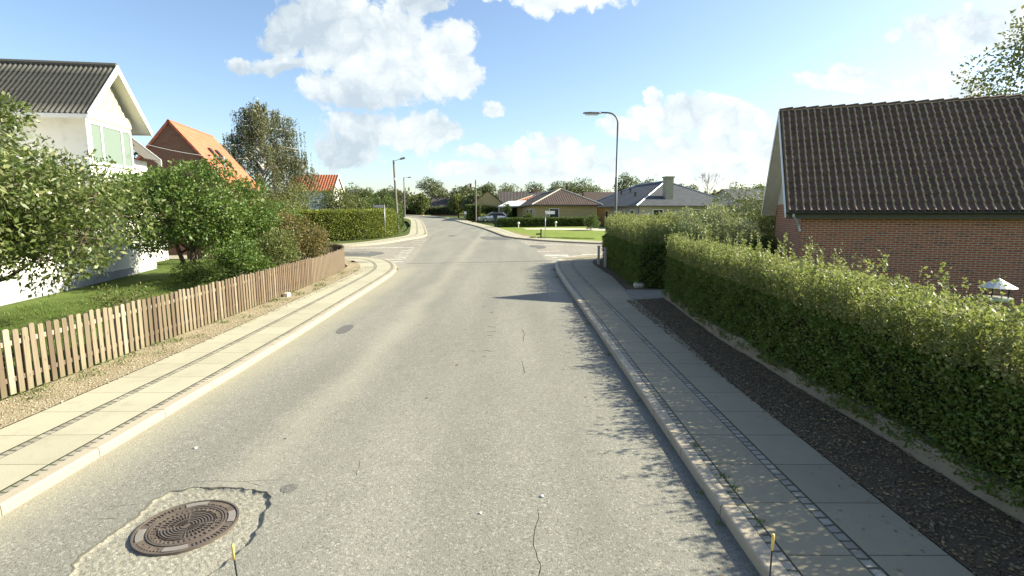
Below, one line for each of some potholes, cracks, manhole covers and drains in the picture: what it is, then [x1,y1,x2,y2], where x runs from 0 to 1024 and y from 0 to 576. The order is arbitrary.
manhole cover [130,499,239,556]
crack [533,506,541,576]
